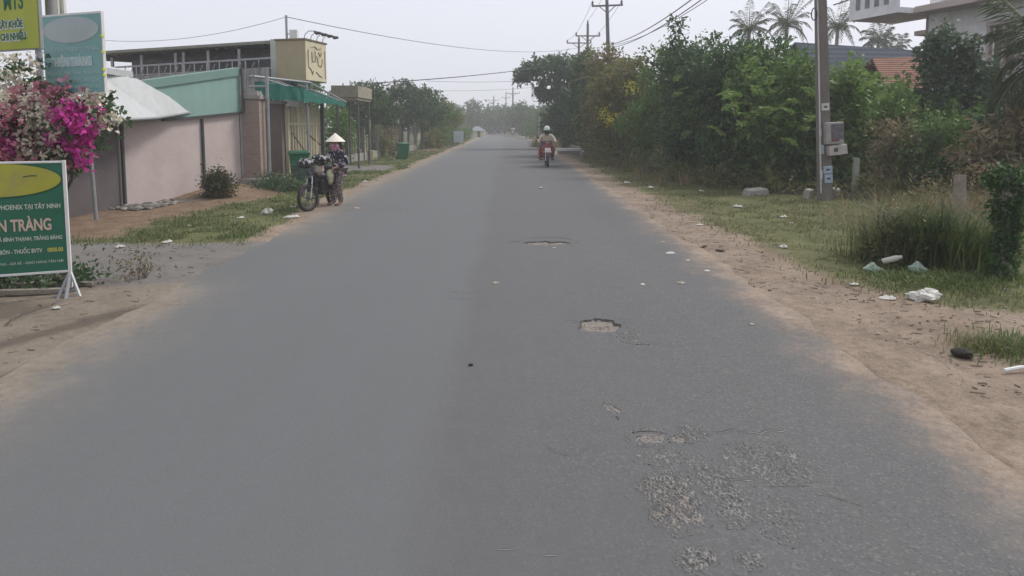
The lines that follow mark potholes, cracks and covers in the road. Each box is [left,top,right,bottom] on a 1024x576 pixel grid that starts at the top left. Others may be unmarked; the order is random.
pothole [578,318,622,333]
pothole [634,433,666,444]
pothole [601,402,622,414]
